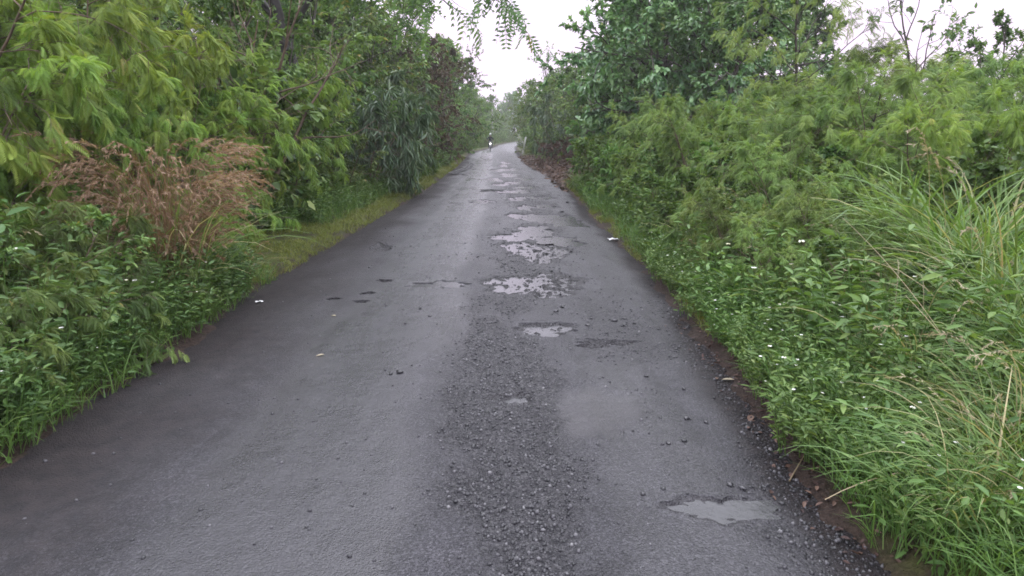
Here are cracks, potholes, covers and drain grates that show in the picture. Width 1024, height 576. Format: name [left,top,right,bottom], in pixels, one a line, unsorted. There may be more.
pothole [453,267,607,305]
pothole [632,490,803,533]
pothole [340,298,384,306]
pothole [487,240,593,269]
pothole [508,224,560,238]
pothole [498,211,552,221]
pothole [345,289,389,297]
pothole [383,277,493,290]
pothole [364,240,398,254]
pothole [478,229,551,244]
pothole [497,319,591,341]
